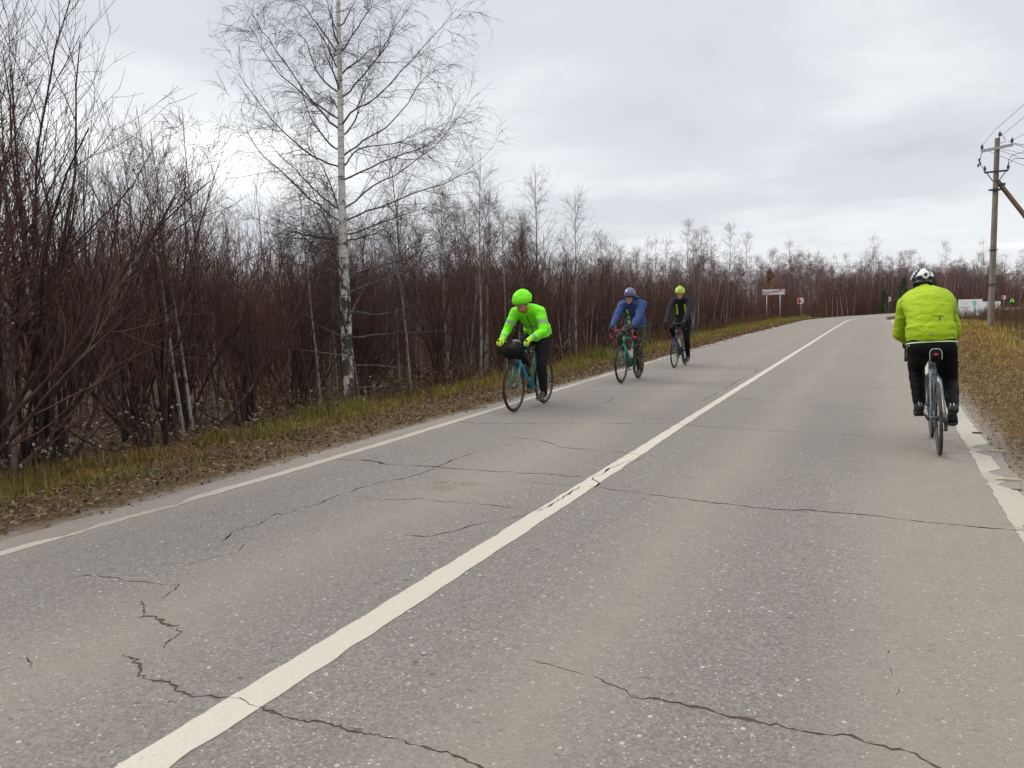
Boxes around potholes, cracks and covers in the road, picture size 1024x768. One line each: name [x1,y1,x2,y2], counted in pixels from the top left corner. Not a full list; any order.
crack [533,660,940,768]
crack [189,437,1016,565]
crack [123,655,484,768]
crack [70,575,182,648]
